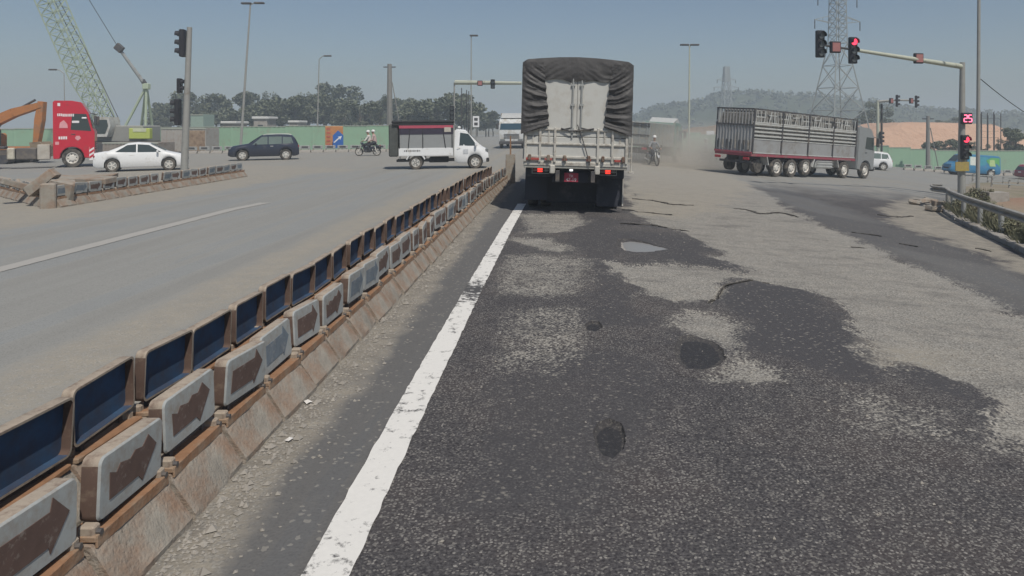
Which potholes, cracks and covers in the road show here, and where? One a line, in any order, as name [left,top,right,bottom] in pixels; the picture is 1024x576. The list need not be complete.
pothole [582,407,637,474]
pothole [664,330,738,378]
crack [734,208,797,217]
pothole [607,236,680,255]
crack [620,198,694,231]
crack [708,279,769,303]
crack [851,214,914,248]
